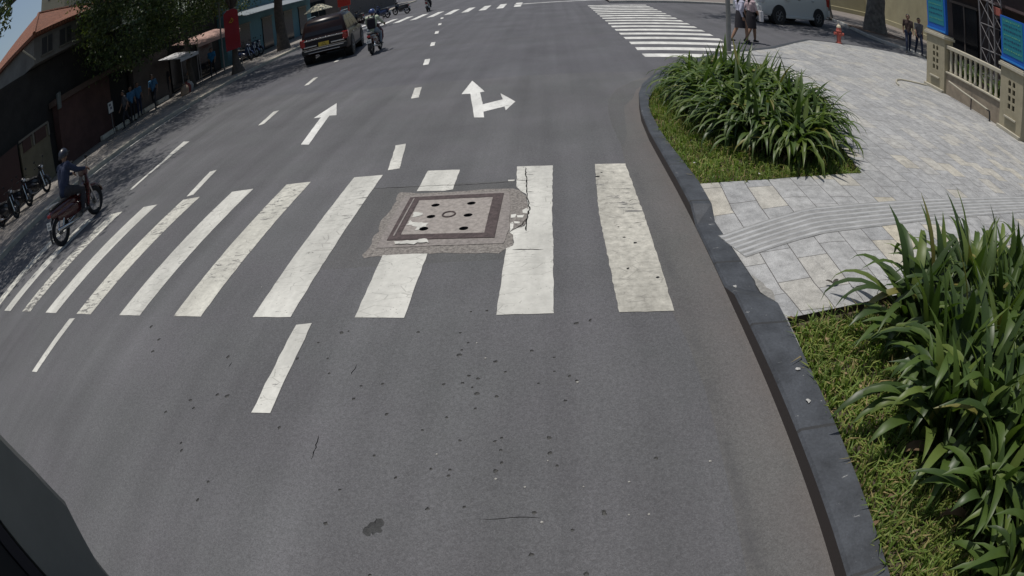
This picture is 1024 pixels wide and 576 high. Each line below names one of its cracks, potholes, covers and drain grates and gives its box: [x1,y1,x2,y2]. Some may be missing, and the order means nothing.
crack [512,170,535,250]
manhole cover [362,188,529,258]
